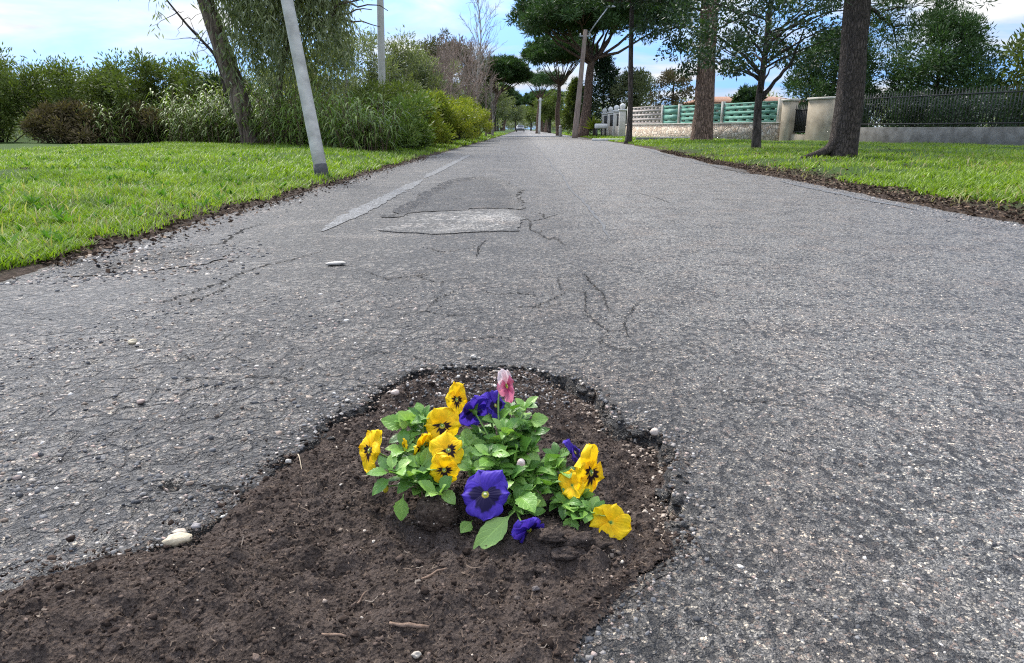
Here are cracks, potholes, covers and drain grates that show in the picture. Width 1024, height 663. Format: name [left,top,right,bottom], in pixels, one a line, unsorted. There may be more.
crack [181,223,267,252]
crack [515,190,564,244]
crack [161,249,327,306]
crack [361,270,652,350]
pothole [93,363,701,663]
